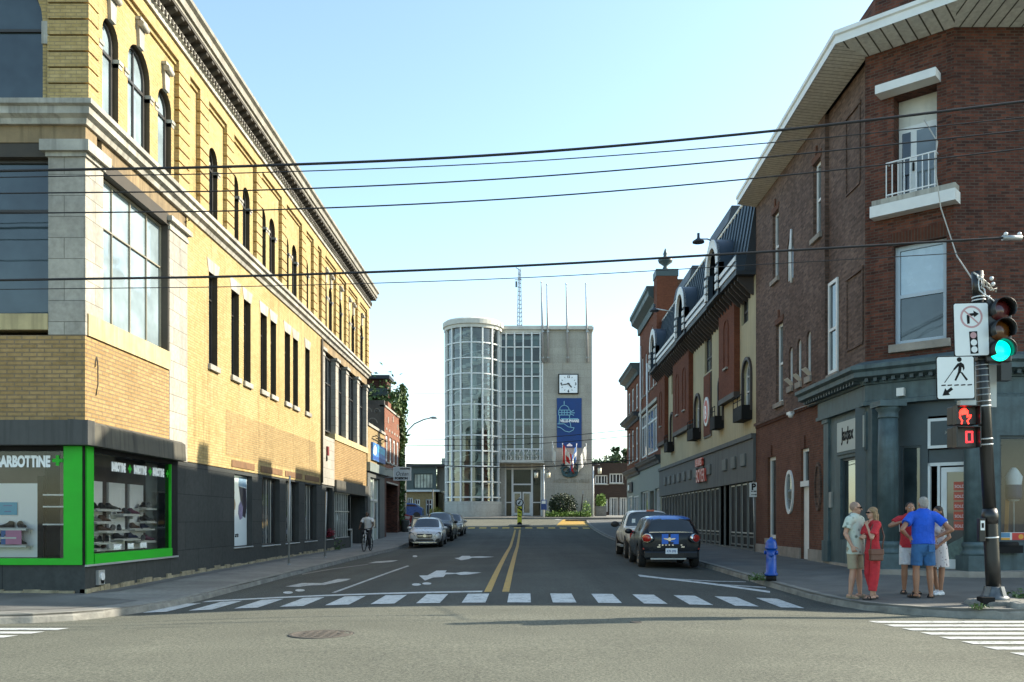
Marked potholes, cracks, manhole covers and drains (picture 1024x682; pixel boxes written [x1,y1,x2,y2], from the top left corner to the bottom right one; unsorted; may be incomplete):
manhole cover [288,630,355,639]
